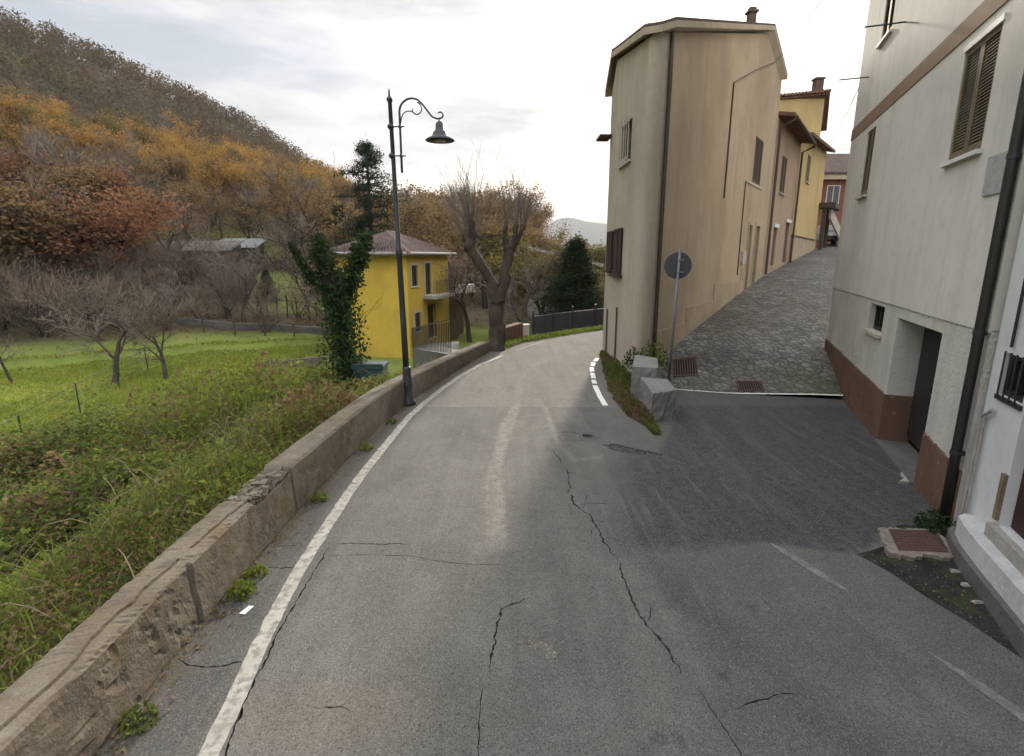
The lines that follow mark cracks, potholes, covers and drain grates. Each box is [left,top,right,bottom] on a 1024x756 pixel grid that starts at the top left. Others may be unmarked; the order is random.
crack [477,597,530,756]
drain grate [672,356,698,377]
drain grate [735,381,765,391]
crack [552,450,804,756]
